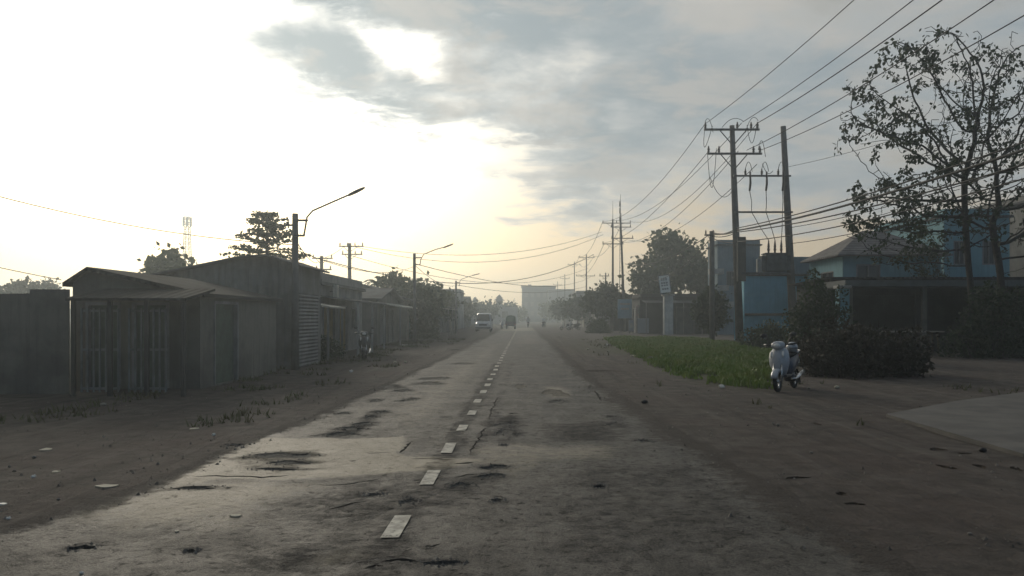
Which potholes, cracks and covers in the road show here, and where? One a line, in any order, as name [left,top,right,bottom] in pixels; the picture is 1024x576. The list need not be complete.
crack [367,398,513,483]
